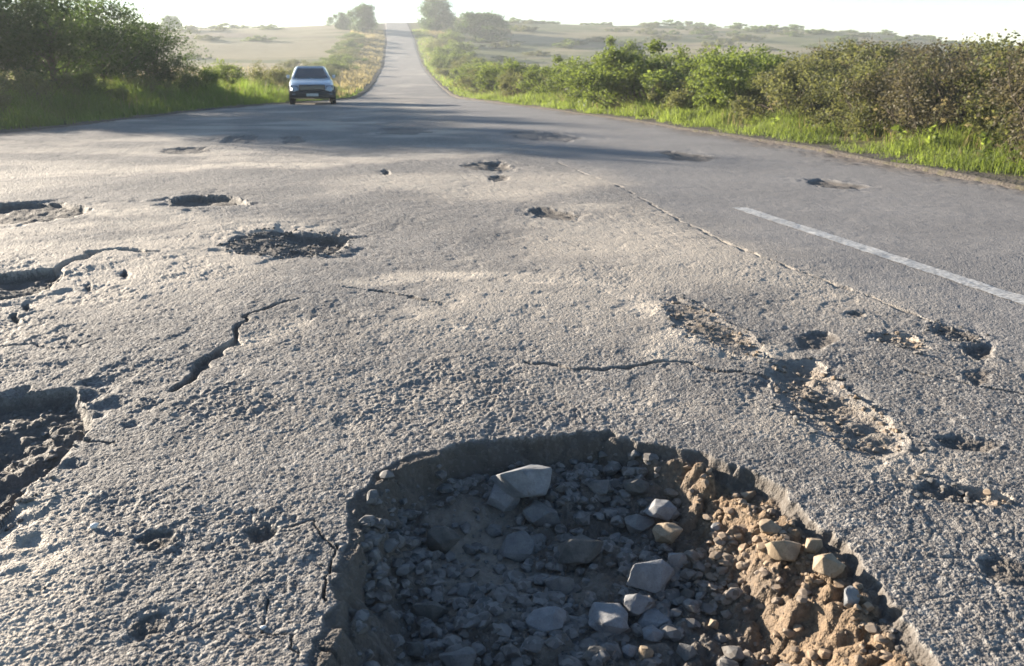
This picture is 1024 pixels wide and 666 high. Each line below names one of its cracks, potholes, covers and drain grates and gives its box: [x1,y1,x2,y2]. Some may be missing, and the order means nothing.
crack [53,247,156,278]
pothole [0,389,93,527]
pothole [910,479,1014,507]
pothole [304,429,941,666]
pothole [169,194,250,207]
pothole [961,343,996,362]
pothole [930,323,982,341]
pothole [807,179,875,189]
pothole [660,296,764,359]
crack [522,359,767,380]
crack [166,297,302,392]
pothole [655,151,724,162]
